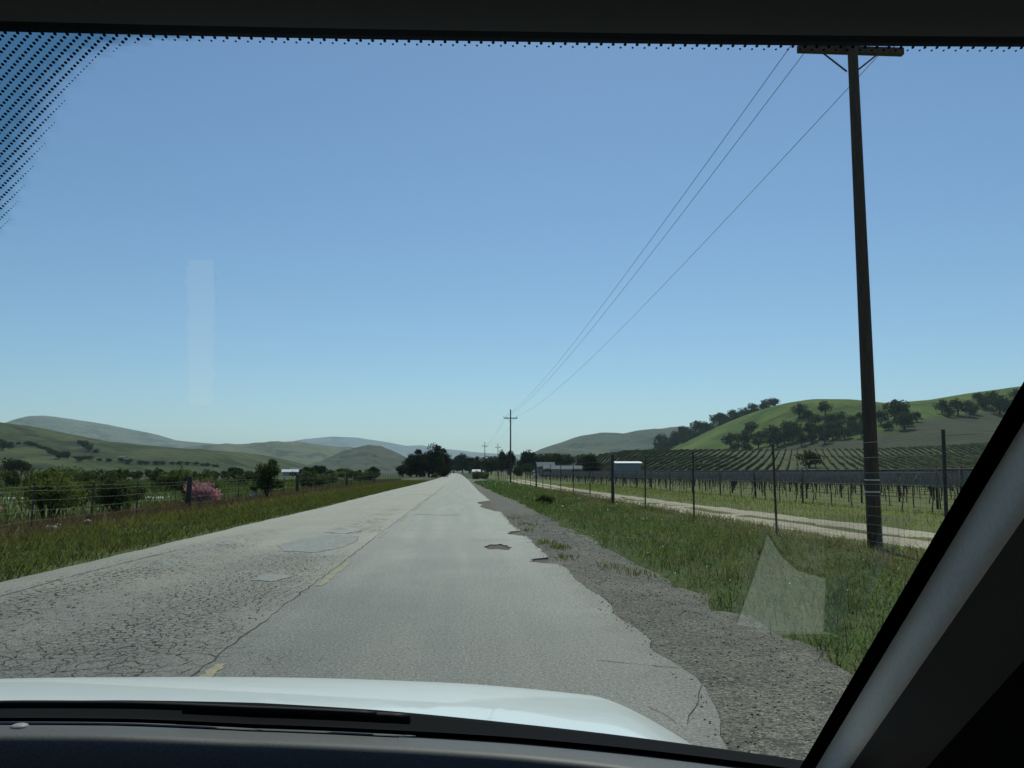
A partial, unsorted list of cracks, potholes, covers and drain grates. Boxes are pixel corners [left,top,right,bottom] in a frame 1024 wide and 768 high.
crack [0,549,352,678]
crack [0,528,277,634]
